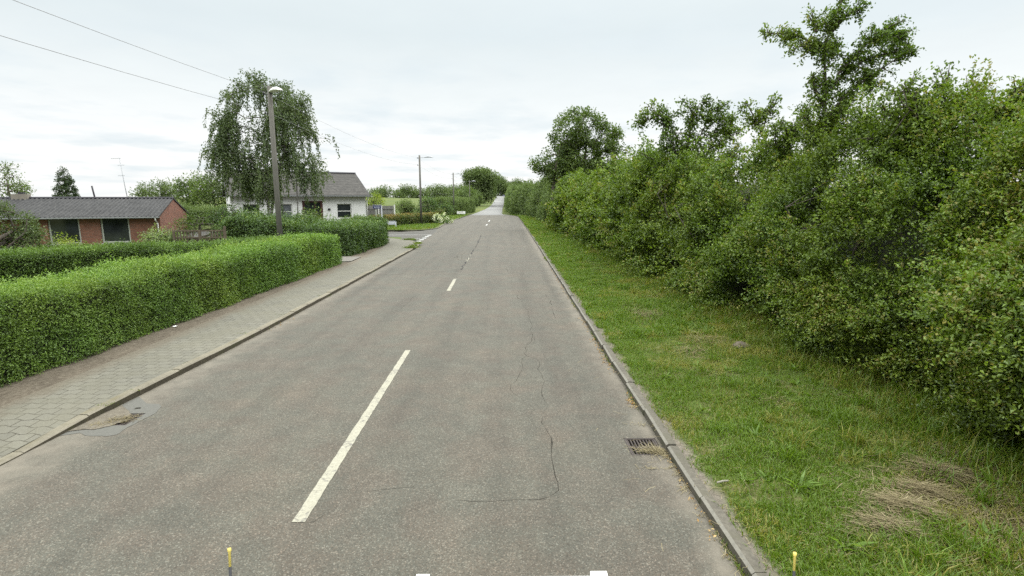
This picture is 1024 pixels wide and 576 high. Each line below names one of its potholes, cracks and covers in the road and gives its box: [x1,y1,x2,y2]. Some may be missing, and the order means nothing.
drain grate [624,438,664,455]
crack [462,297,559,502]
